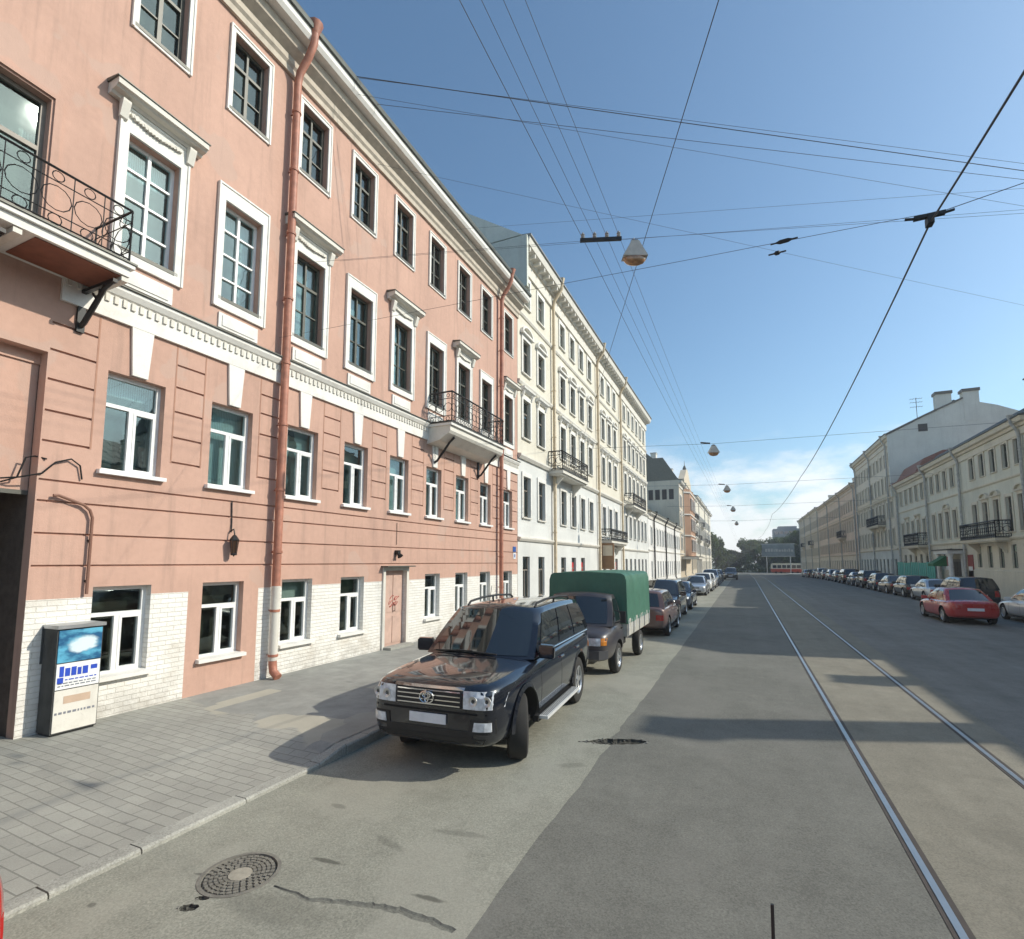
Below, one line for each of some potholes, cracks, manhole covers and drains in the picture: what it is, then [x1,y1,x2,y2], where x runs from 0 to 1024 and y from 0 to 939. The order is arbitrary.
manhole cover [196,852,282,899]
pothole [177,903,199,912]
crack [275,885,456,933]
